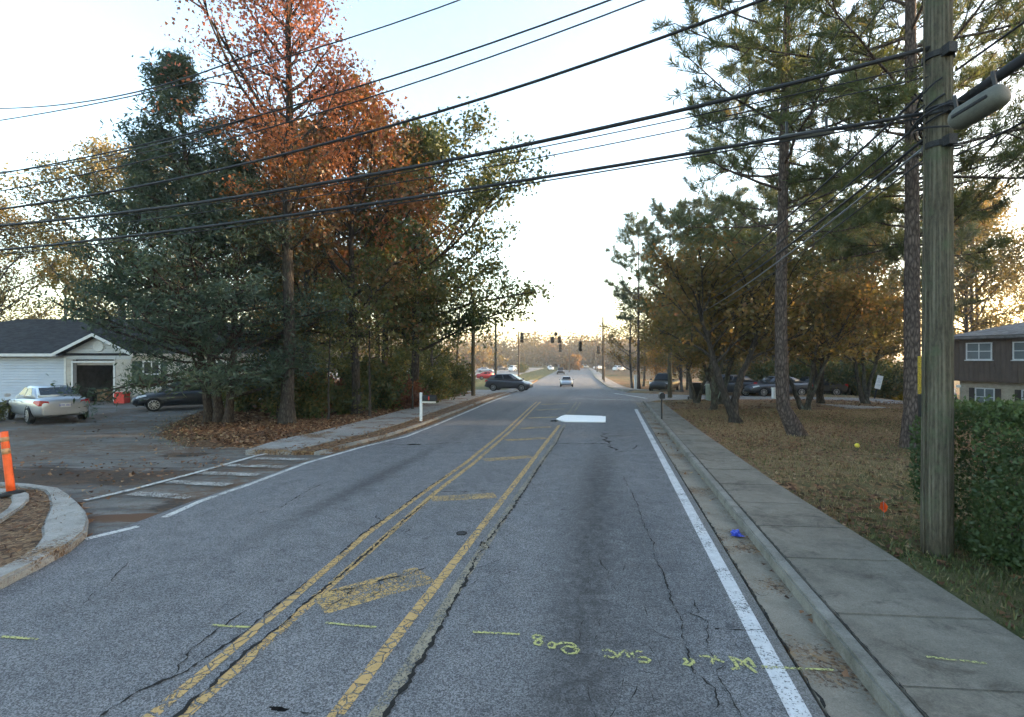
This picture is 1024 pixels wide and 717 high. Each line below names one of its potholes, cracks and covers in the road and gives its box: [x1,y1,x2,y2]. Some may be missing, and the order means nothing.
crack [560,432,638,452]
crack [51,562,136,616]
crack [99,474,468,717]
crack [565,476,741,717]
